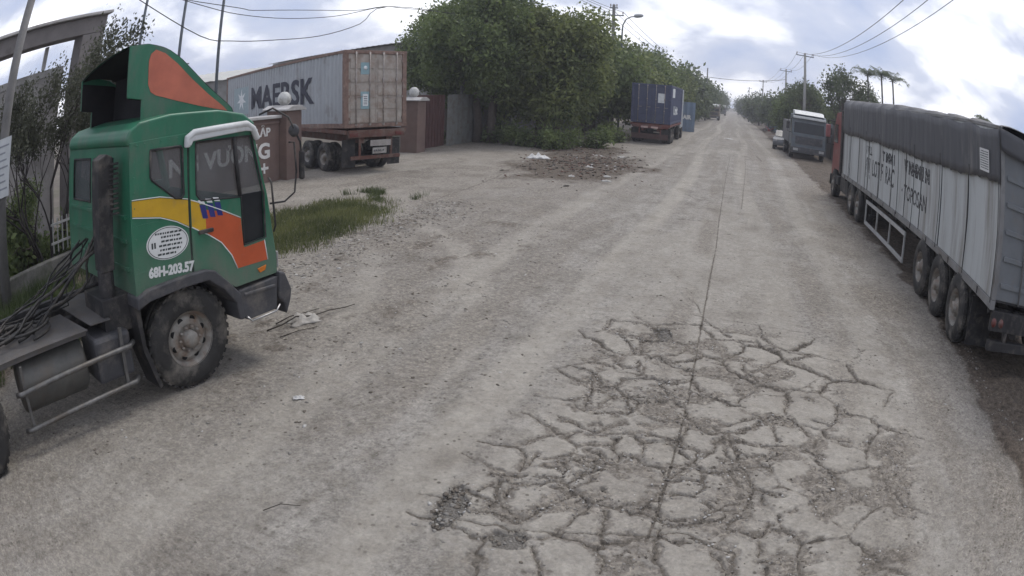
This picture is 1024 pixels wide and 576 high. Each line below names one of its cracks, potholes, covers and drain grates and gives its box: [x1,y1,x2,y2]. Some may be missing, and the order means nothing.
pothole [434,487,468,531]
pothole [492,534,524,550]
crack [406,158,936,576]
